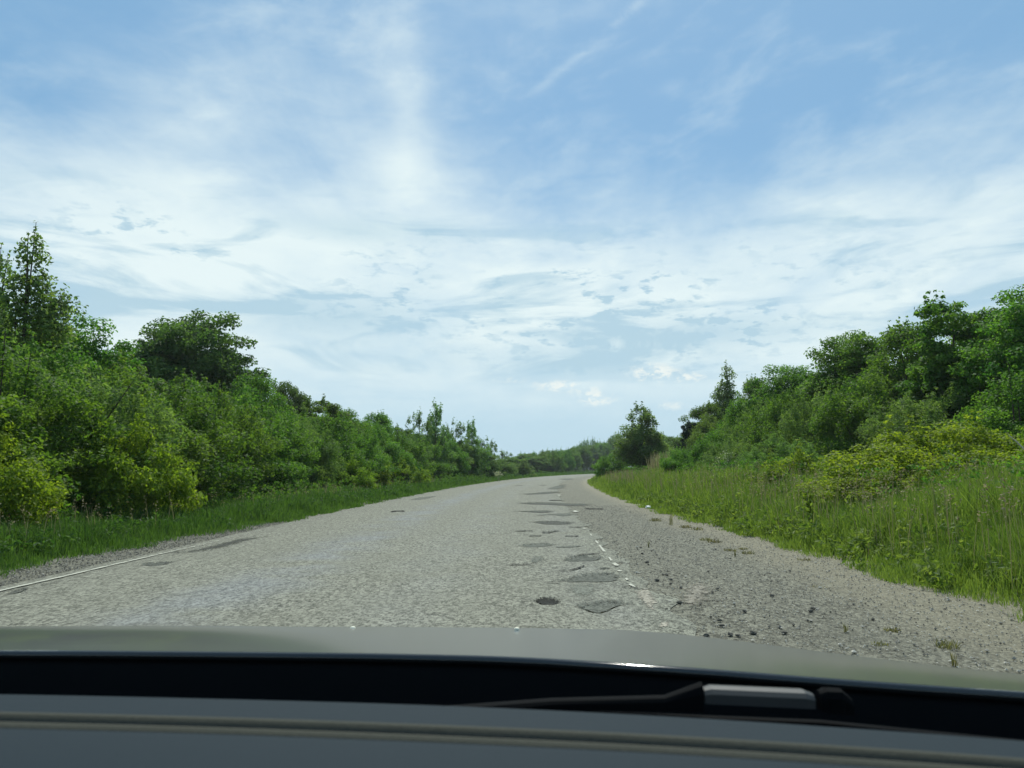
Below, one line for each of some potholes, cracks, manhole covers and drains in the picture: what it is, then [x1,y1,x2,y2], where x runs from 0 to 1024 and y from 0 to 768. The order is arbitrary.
pothole [536,597,559,605]
